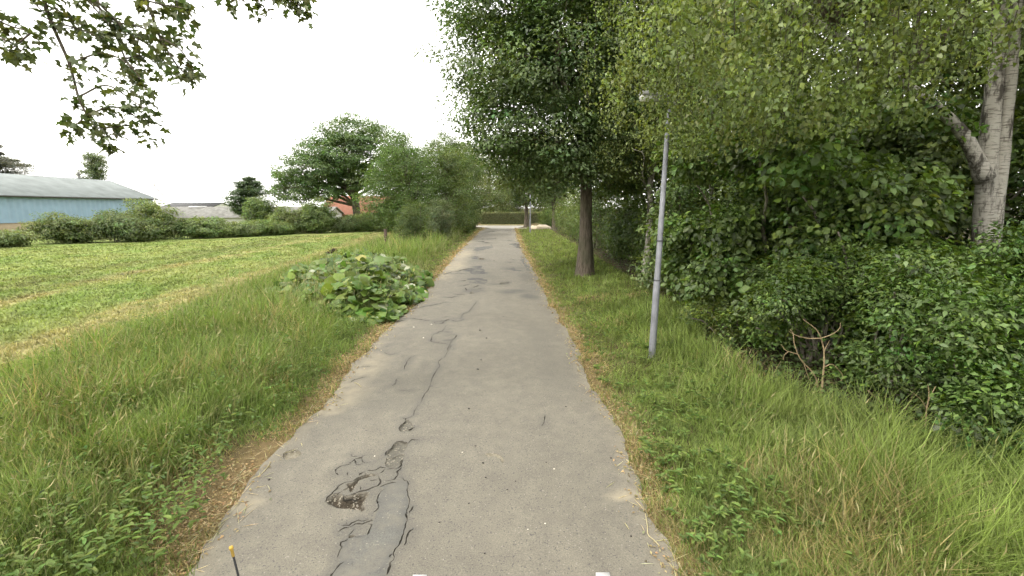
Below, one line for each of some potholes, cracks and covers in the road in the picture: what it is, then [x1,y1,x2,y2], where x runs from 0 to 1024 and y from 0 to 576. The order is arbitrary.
pothole [386,441,408,458]
pothole [326,492,369,512]
pothole [282,449,302,460]
pothole [343,473,378,492]
crack [326,416,415,576]
pothole [385,454,405,468]
